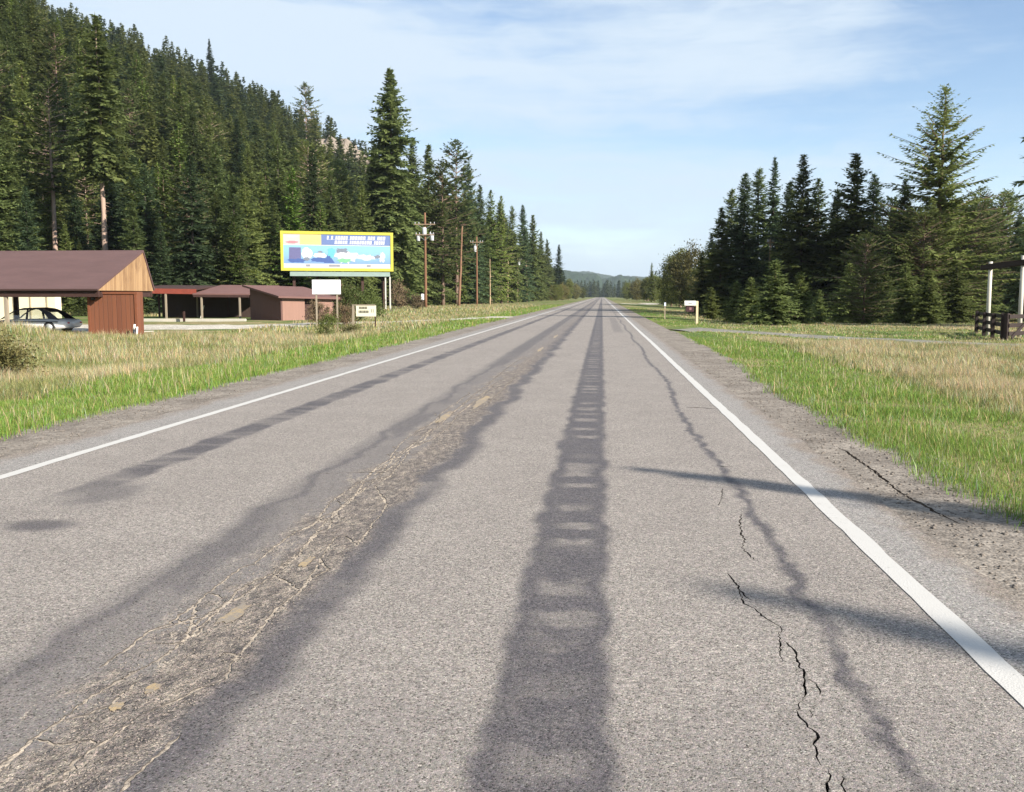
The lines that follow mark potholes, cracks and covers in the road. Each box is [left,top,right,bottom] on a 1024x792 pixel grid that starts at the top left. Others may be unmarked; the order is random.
crack [838,447,960,524]
crack [676,484,846,792]
crack [0,359,520,792]
